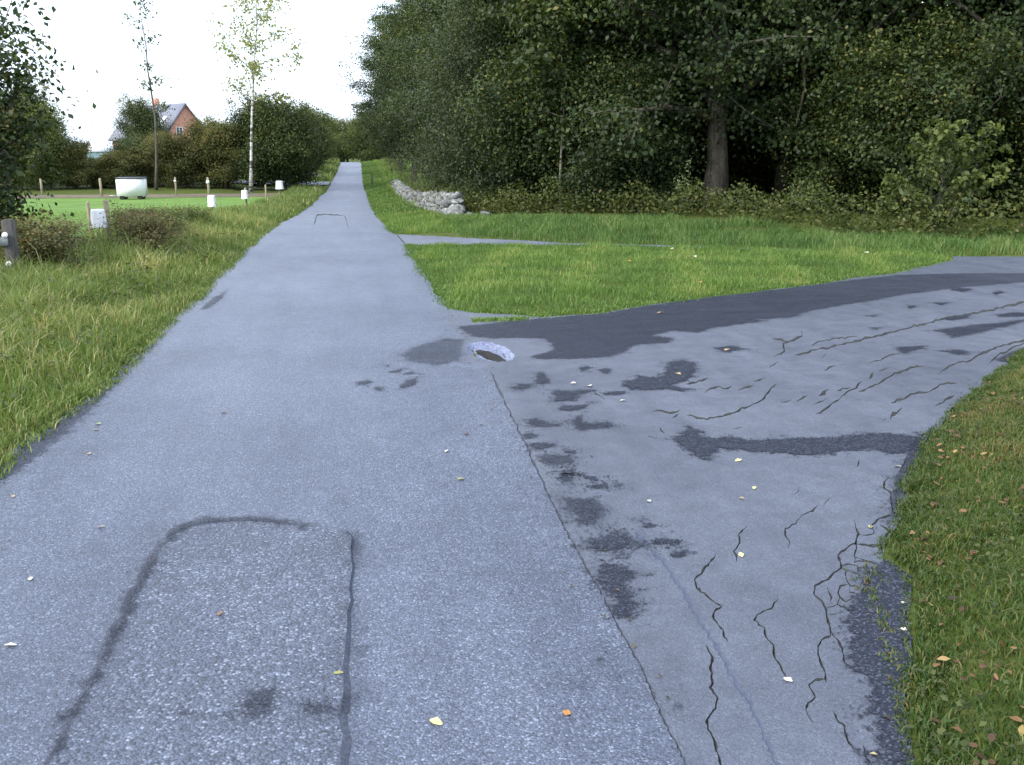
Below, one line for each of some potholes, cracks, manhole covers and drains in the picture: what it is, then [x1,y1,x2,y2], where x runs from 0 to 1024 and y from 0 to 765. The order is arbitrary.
crack [753,599,786,676]
crack [784,487,830,547]
crack [694,526,747,765]
crack [648,301,1024,438]
crack [805,454,909,765]
pothole [467,341,515,362]
